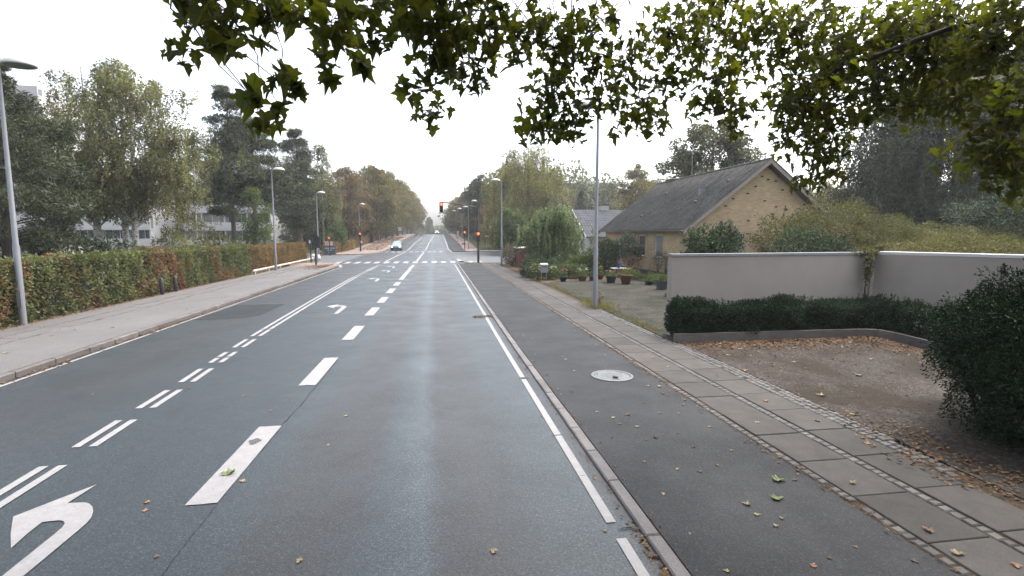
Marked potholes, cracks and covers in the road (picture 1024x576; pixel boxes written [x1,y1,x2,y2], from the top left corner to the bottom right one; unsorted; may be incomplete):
manhole cover [591,370,633,382]
